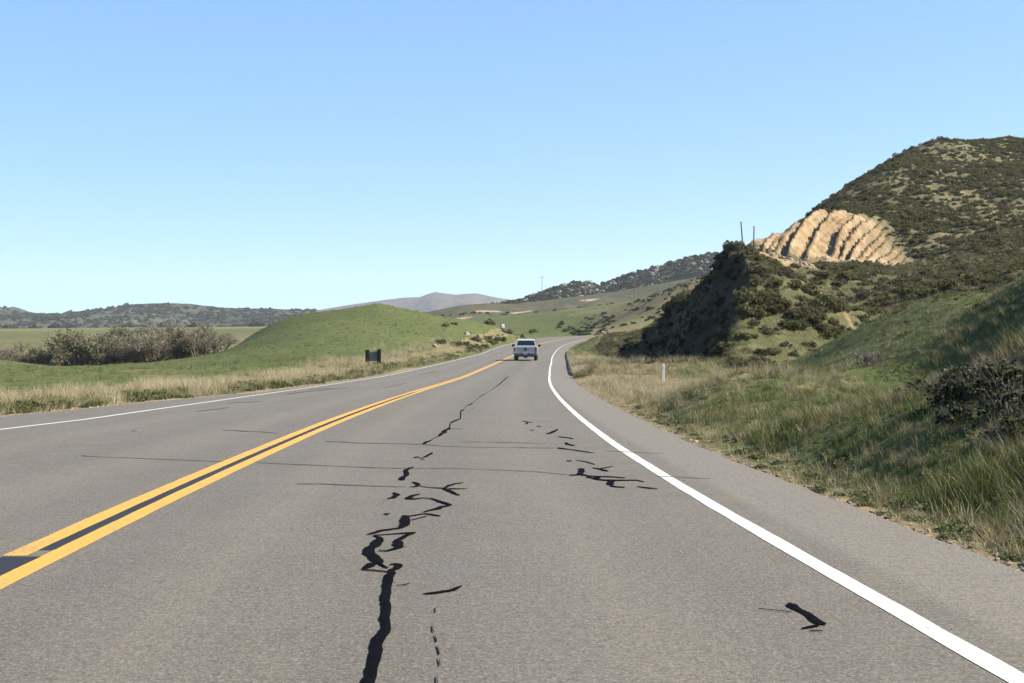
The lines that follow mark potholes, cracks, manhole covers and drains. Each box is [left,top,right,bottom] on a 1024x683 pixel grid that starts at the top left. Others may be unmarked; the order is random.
crack [432,606,445,683]
